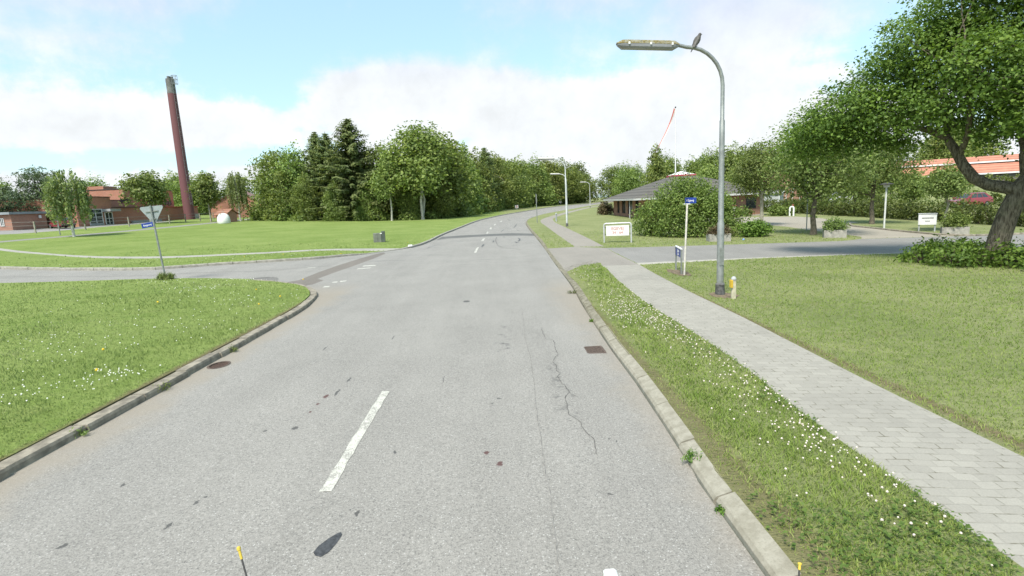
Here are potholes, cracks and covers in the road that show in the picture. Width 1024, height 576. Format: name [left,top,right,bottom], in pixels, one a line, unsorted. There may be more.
crack [541,329,597,454]
drain grate [584,346,606,354]
